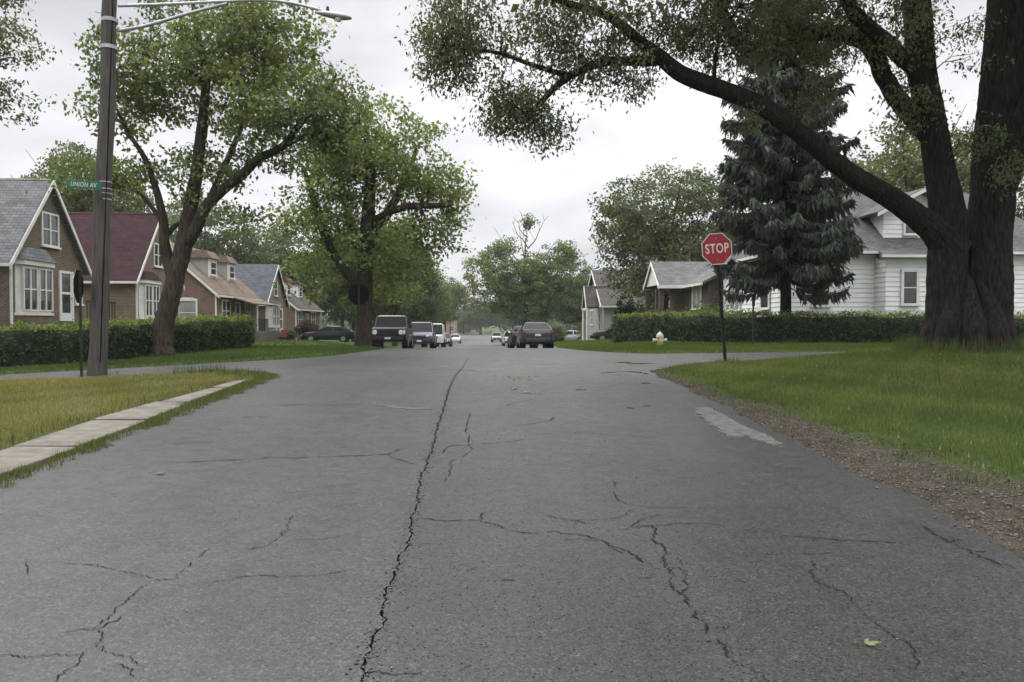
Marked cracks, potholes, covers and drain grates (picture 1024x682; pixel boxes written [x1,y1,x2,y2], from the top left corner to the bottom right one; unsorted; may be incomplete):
crack [795,536,933,668]
crack [1,548,211,682]
crack [923,525,1018,568]
crack [191,360,769,682]
